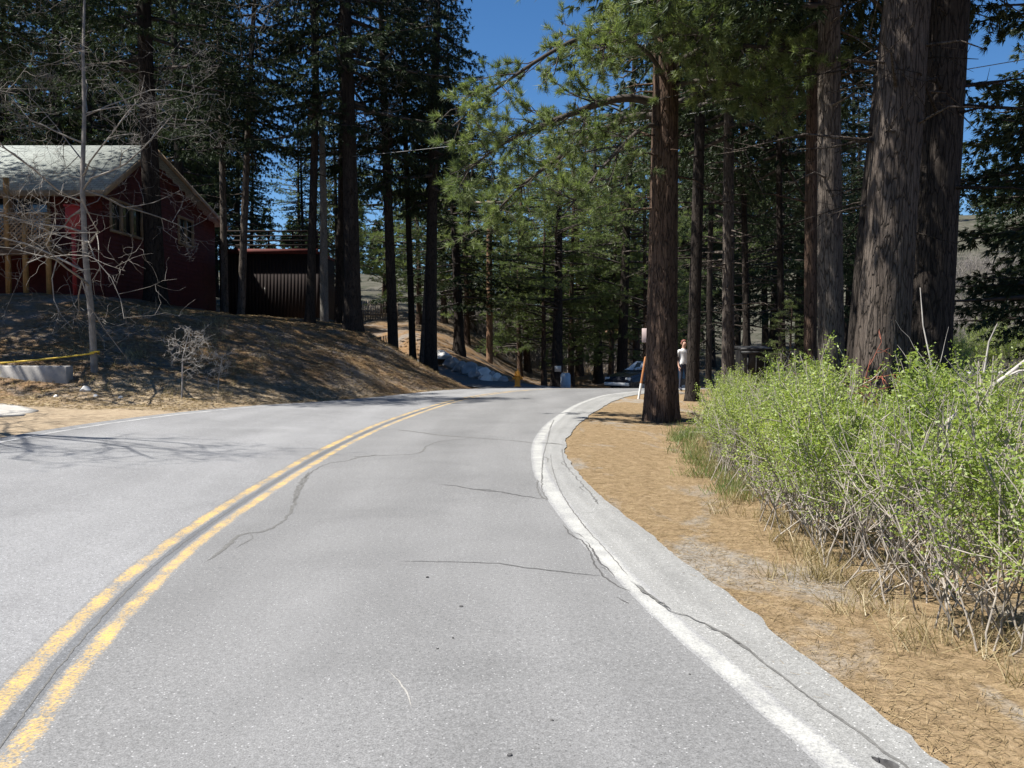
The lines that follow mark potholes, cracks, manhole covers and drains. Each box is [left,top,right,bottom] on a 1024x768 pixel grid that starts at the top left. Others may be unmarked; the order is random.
crack [431,525,628,603]
crack [207,420,598,561]
